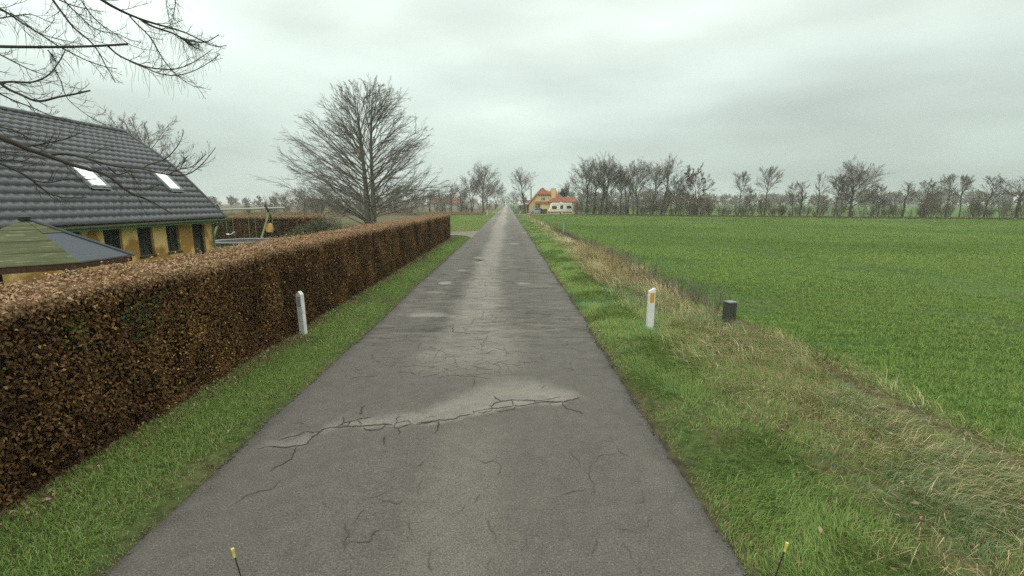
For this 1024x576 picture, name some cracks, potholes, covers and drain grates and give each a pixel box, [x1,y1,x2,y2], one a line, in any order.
crack [345,261,579,384]
crack [566,440,629,494]
crack [321,461,423,553]
crack [259,385,584,471]
